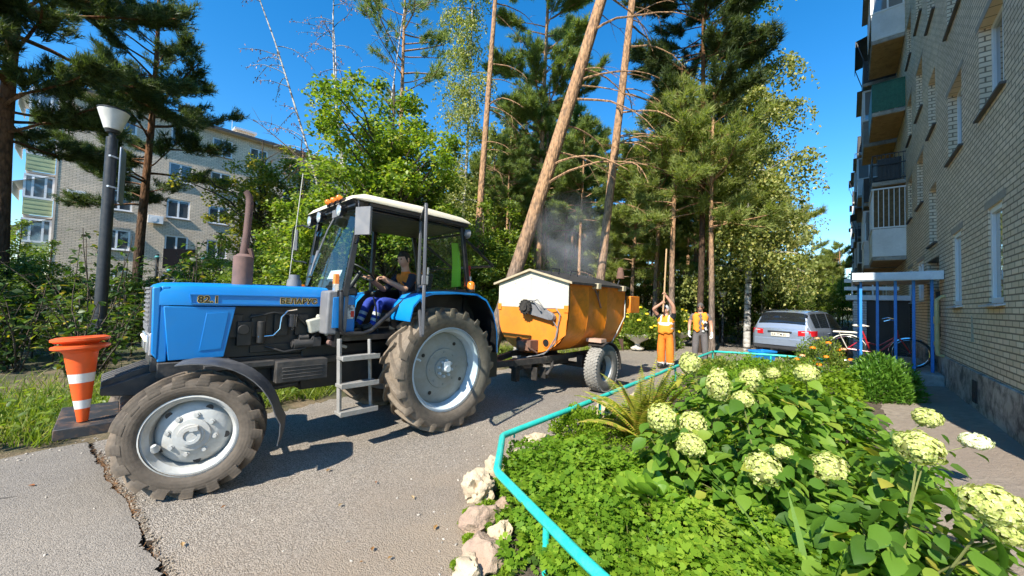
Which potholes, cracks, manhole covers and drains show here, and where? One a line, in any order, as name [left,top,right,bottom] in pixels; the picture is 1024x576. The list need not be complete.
crack [87,442,178,576]
